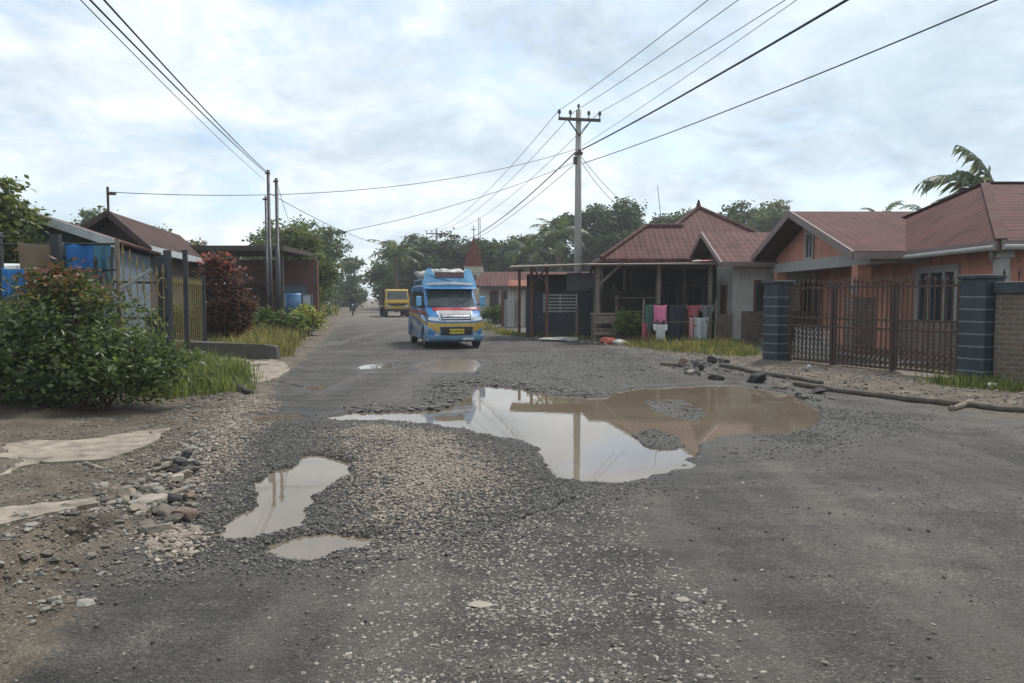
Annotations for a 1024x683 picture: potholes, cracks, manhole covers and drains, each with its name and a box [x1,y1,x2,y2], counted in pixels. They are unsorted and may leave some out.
pothole [411,358,484,373]
pothole [203,451,359,541]
pothole [250,527,392,562]
pothole [310,382,828,483]
